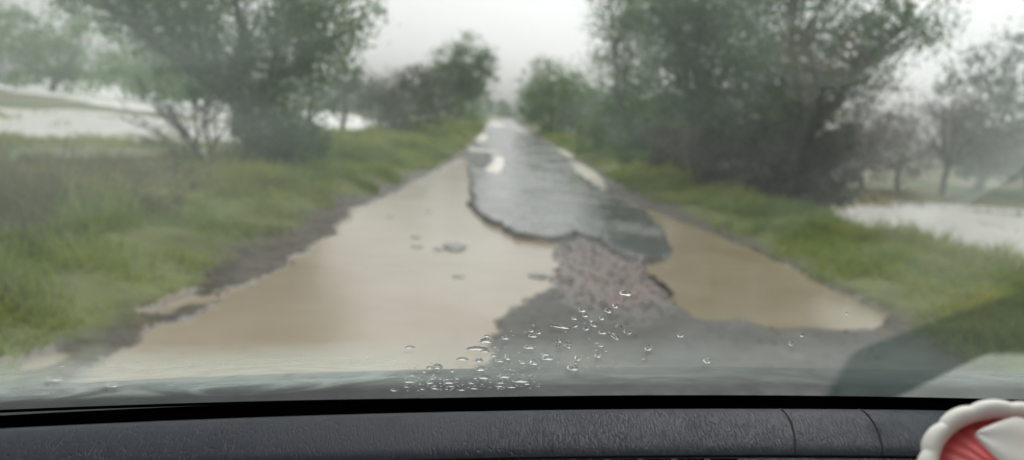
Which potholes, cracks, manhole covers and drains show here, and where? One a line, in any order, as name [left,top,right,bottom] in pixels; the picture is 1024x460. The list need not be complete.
pothole [487,216,678,327]
pothole [612,194,892,330]
